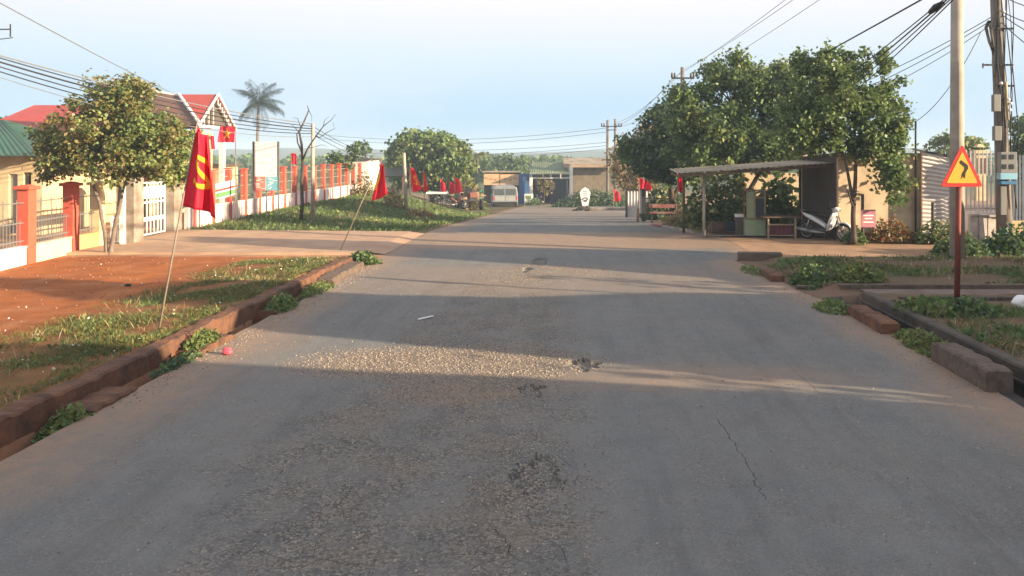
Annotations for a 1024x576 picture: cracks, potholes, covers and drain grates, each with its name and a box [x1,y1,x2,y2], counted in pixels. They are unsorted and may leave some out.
pothole [517,384,548,399]
crack [469,501,576,571]
pothole [507,452,568,495]
crack [717,419,766,500]
pothole [566,358,603,372]
